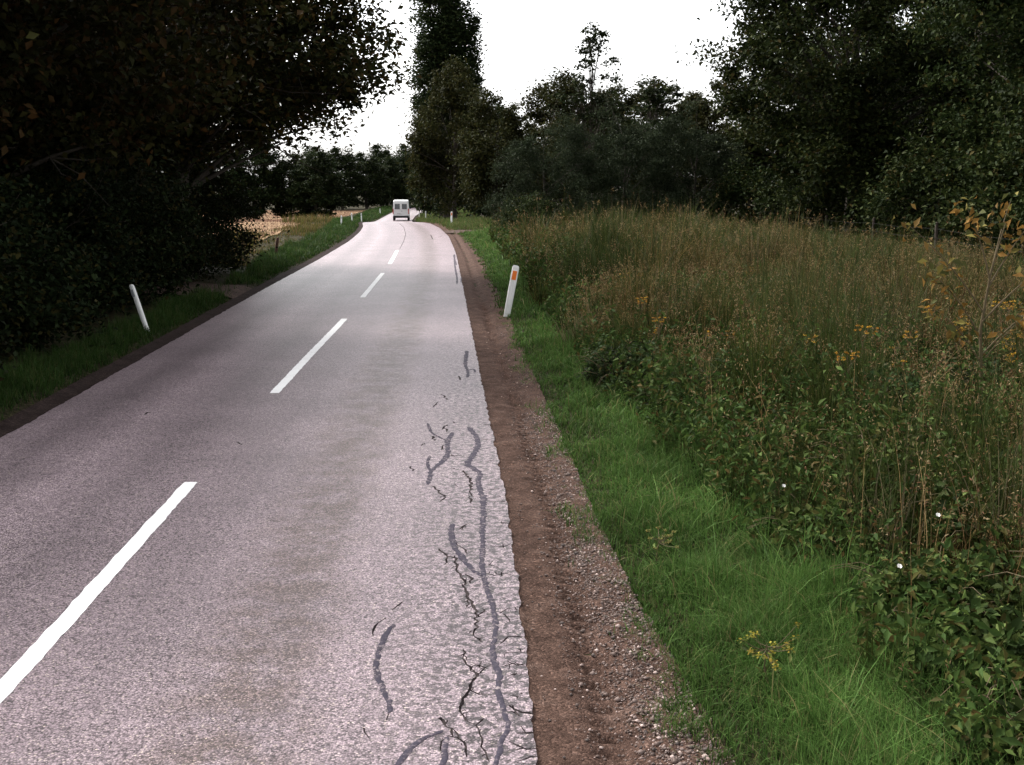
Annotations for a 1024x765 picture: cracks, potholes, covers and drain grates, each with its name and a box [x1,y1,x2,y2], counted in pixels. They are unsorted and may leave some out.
crack [363,602,403,738]
crack [409,394,458,501]
